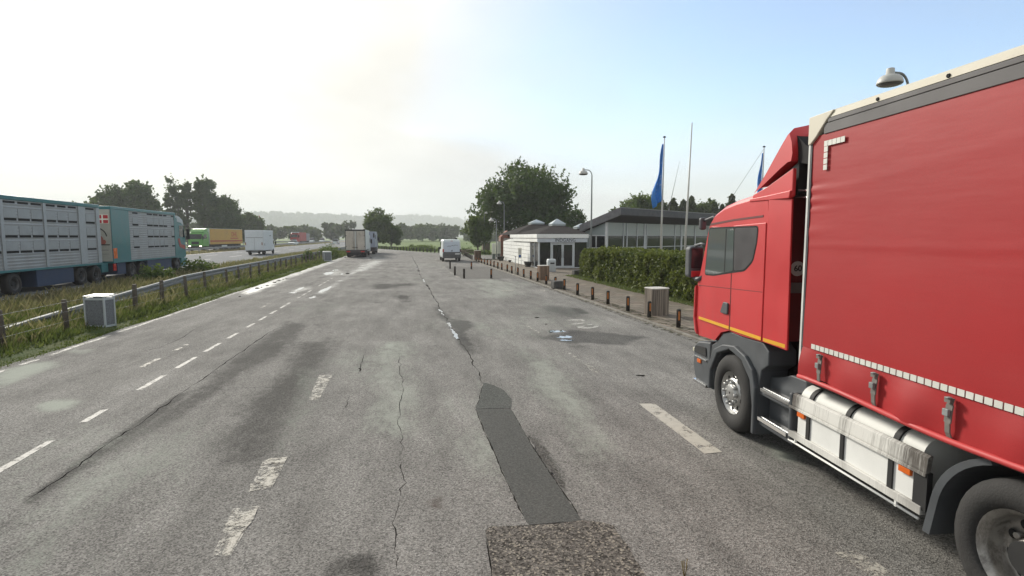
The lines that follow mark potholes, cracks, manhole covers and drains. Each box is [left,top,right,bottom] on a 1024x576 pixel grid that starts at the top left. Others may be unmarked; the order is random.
crack [392,354,407,567]
